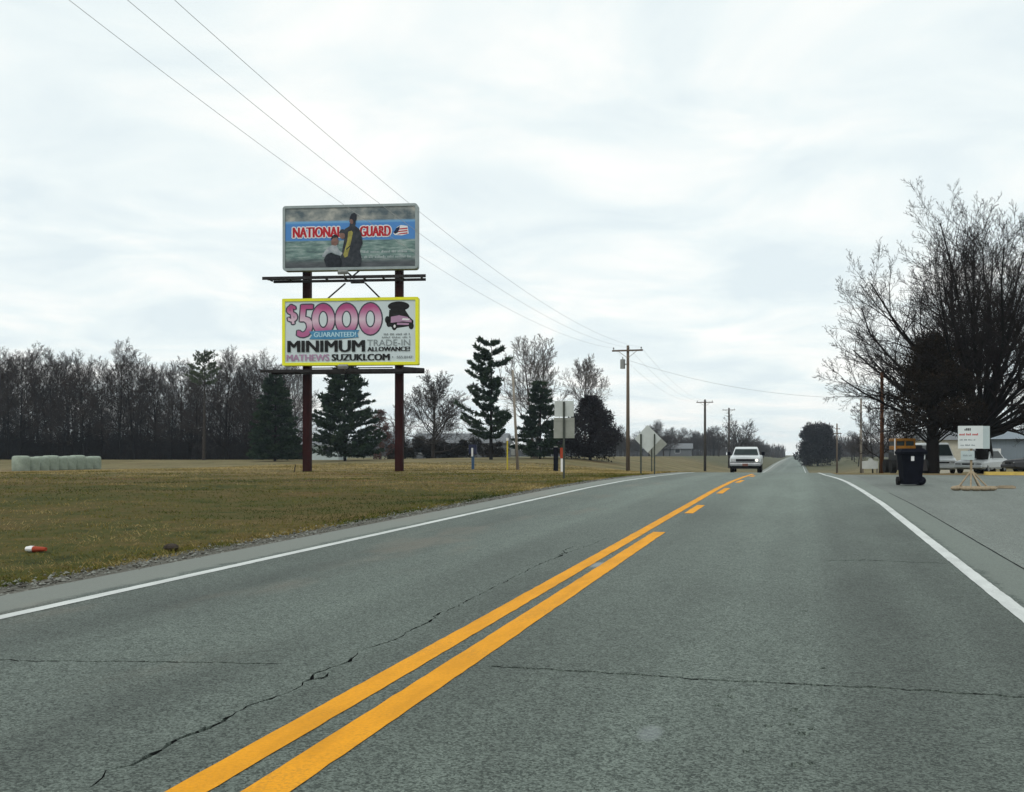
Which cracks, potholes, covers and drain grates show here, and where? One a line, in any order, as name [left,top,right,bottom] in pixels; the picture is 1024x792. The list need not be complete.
crack [92,545,589,786]
crack [497,666,1024,698]
